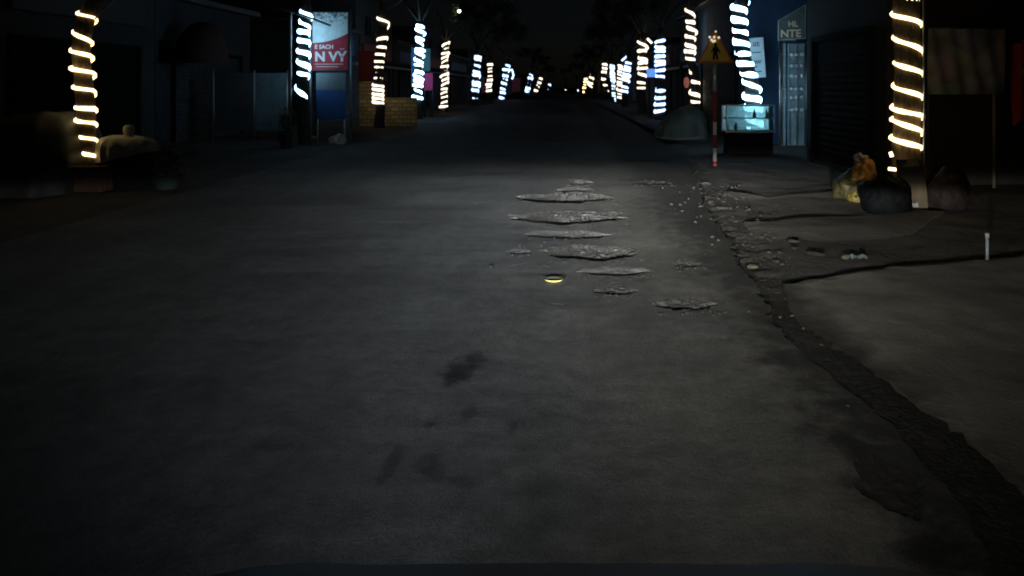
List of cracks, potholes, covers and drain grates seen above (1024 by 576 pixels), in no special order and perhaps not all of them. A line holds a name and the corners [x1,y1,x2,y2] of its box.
pothole [591,284,639,295]
pothole [509,209,629,226]
pothole [516,190,613,203]
pothole [525,230,611,239]
pothole [652,297,718,311]
pothole [577,266,653,276]
pothole [507,247,530,255]
pothole [538,243,637,261]
